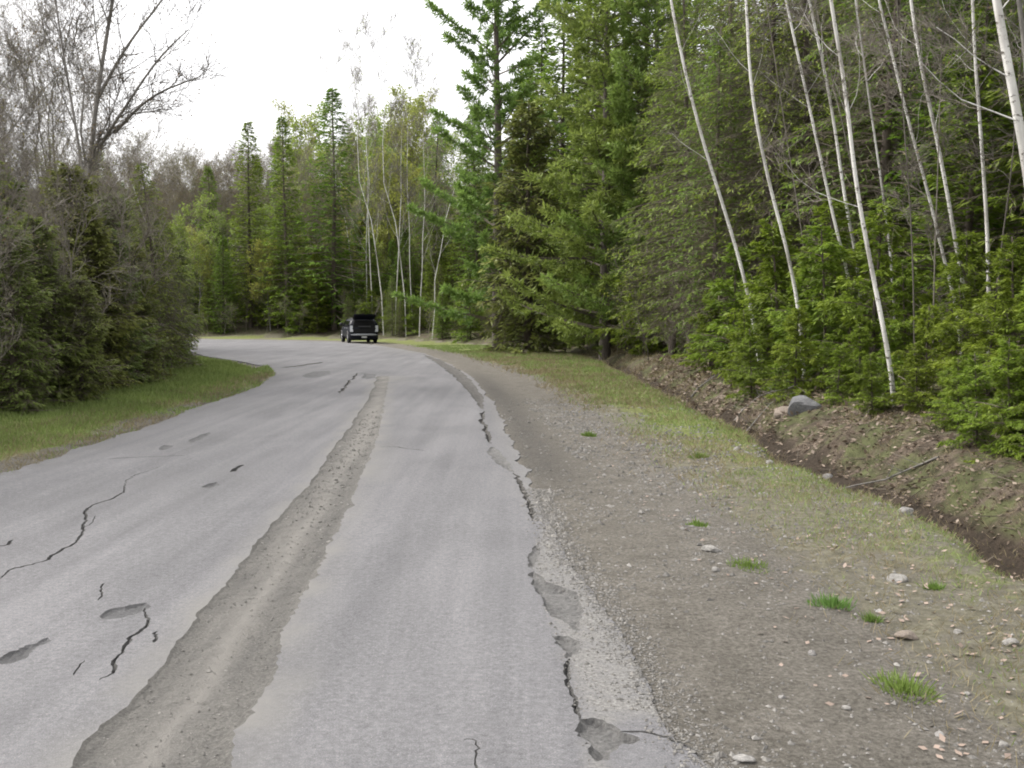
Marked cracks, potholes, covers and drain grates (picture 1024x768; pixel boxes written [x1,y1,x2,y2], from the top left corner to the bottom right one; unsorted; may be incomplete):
pothole [574,718,640,762]
crack [478,411,492,444]
pothole [99,602,151,620]
crack [513,473,536,521]
crack [73,583,158,680]
crack [464,738,480,768]
crack [0,455,184,579]
crack [338,373,359,393]
pothole [0,637,52,664]
pothole [528,571,584,632]
crack [563,659,581,719]
